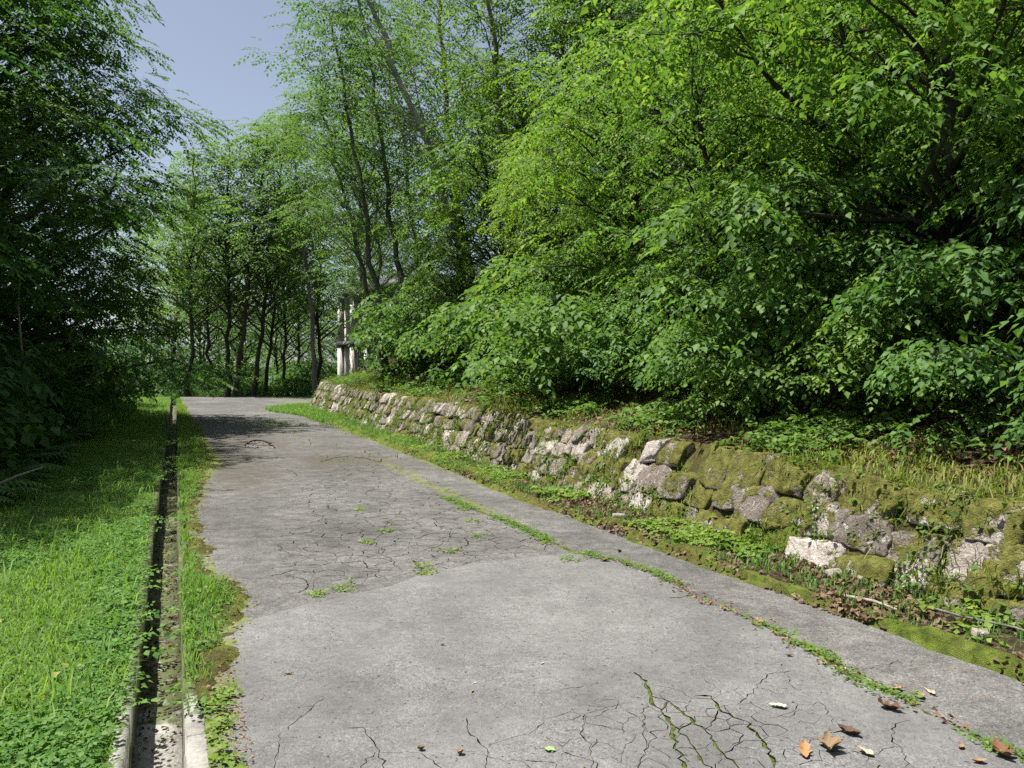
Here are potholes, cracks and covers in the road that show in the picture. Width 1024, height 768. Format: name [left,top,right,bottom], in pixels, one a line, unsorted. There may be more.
crack [866,720,910,768]
crack [354,670,880,768]
crack [272,456,548,593]
crack [274,698,324,767]
